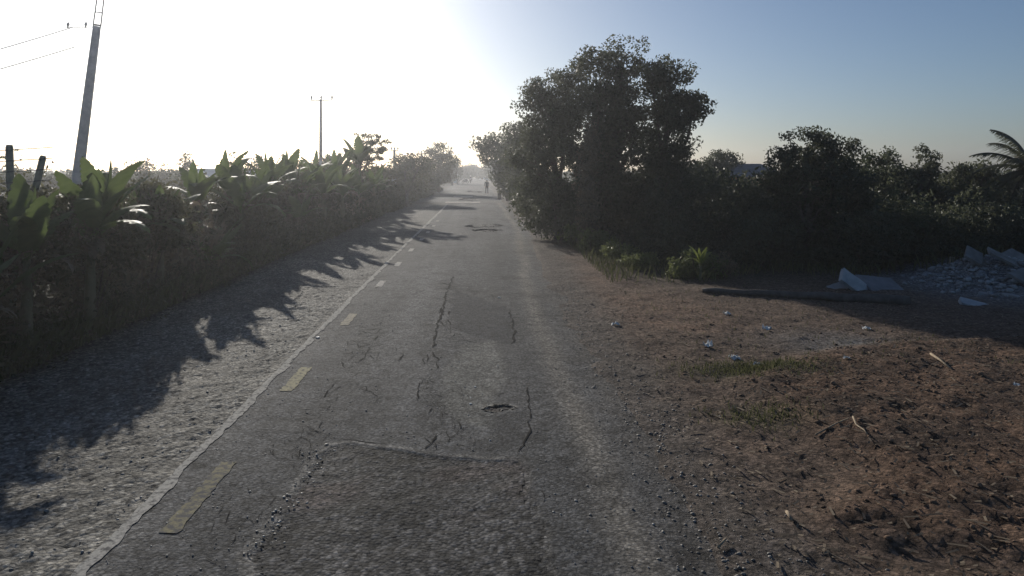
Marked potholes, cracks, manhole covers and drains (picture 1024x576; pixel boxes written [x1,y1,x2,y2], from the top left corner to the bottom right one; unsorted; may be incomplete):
crack [517,386,532,454]
crack [508,308,517,344]
pothole [472,401,527,416]
crack [417,276,476,450]
crack [268,310,403,459]
